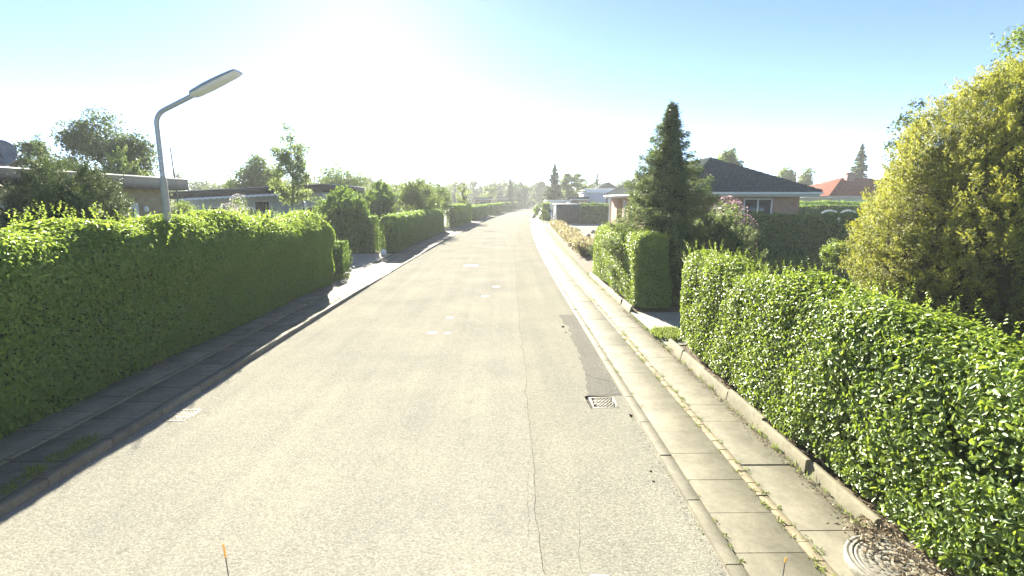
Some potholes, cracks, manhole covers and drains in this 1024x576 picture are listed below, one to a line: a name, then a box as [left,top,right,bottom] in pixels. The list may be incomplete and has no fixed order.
crack [516,275,546,576]
drain grate [160,409,201,421]
manhole cover [843,534,957,576]
drain grate [589,397,619,408]
